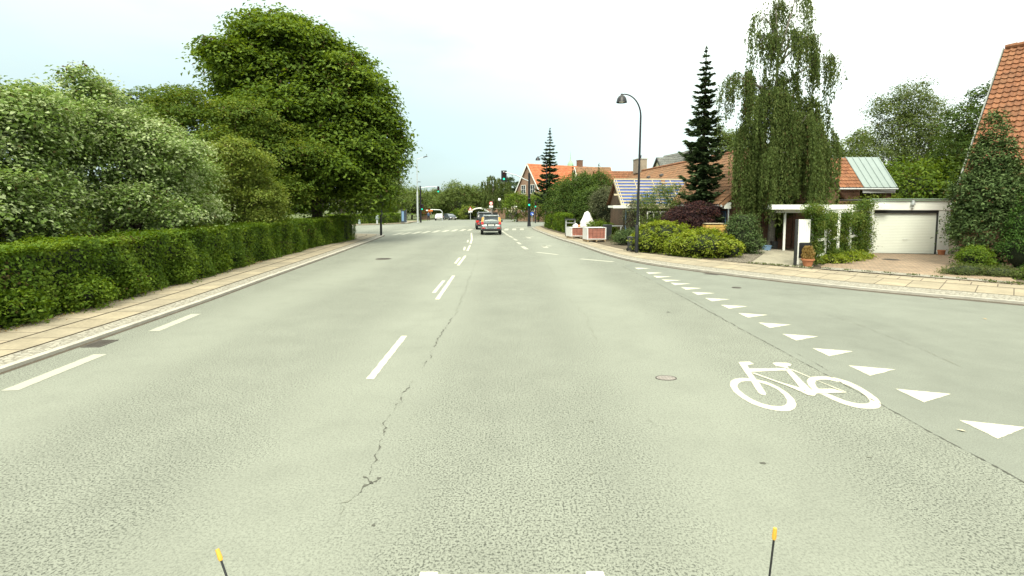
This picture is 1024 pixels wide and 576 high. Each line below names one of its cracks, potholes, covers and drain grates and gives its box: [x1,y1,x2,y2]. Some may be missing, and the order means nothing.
crack [333,252,478,527]
